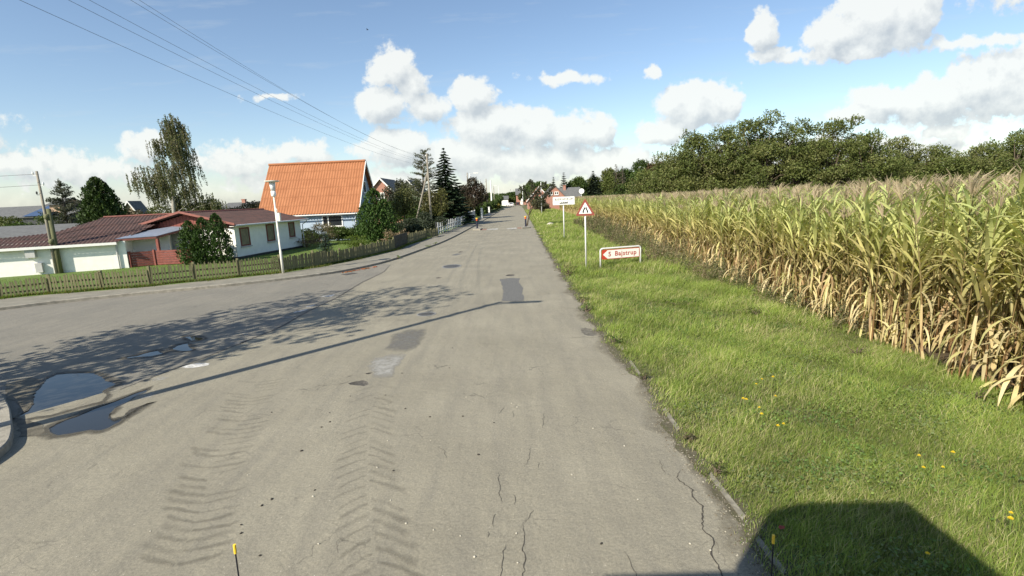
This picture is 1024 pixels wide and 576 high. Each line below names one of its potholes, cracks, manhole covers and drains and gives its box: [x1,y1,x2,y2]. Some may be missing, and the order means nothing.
pothole [168,342,196,352]
pothole [41,387,153,439]
pothole [12,371,122,422]
pothole [119,349,169,359]
crack [659,460,723,576]
crack [488,475,534,576]
